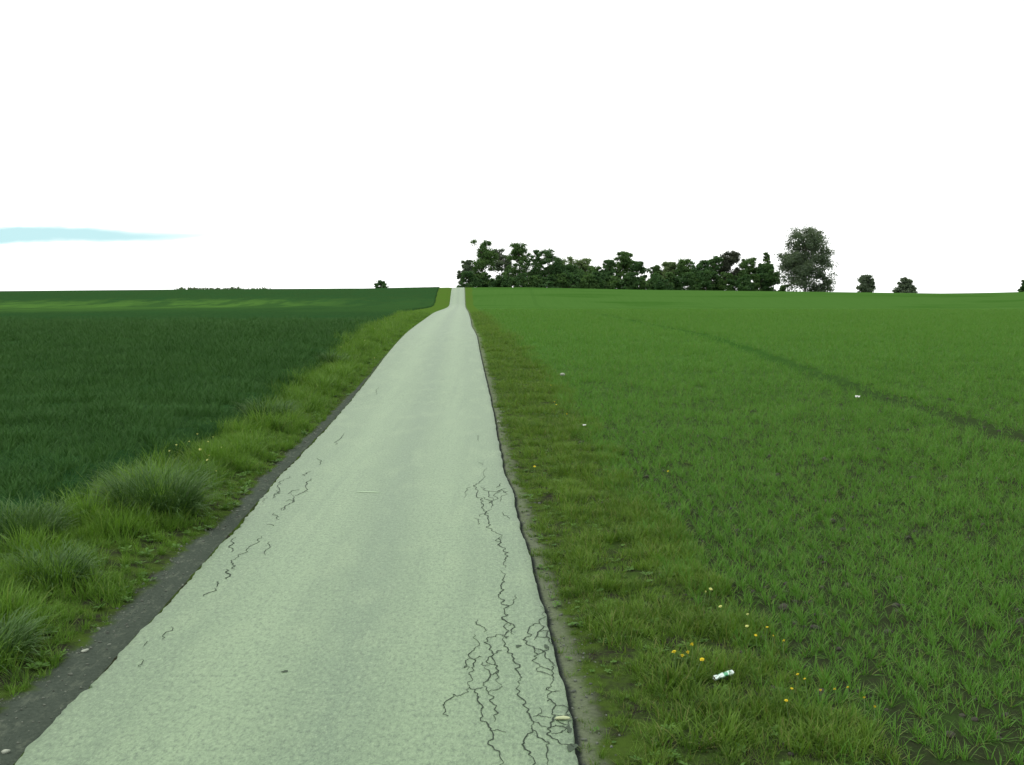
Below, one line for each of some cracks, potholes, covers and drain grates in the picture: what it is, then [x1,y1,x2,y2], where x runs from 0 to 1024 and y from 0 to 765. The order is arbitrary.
crack [443,468,574,765]
crack [203,434,344,596]
